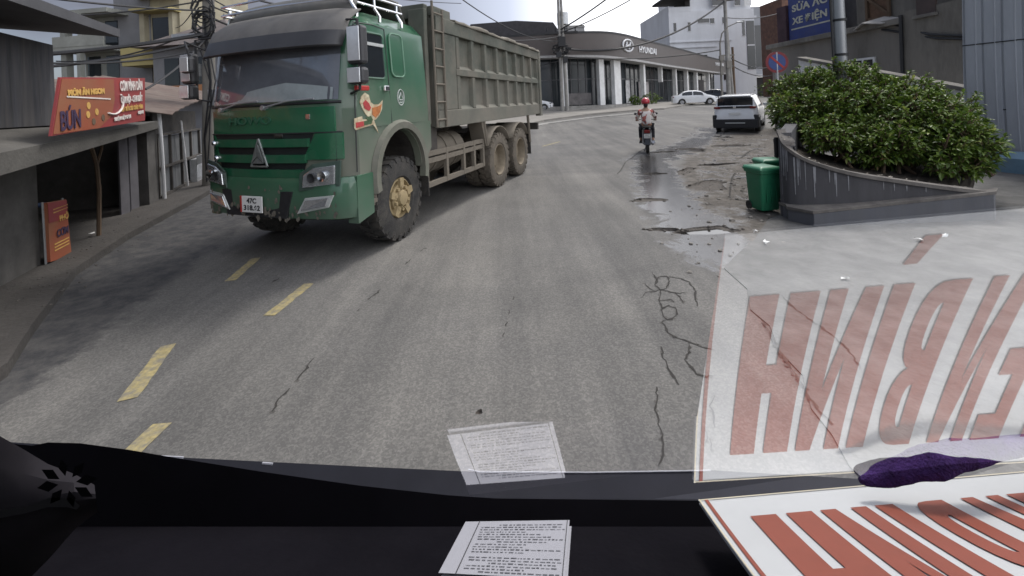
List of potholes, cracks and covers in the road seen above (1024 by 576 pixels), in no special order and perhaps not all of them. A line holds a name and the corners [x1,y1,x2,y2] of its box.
crack [729,149,756,198]
crack [641,274,717,465]
pothole [672,225,745,235]
crack [269,358,314,413]
